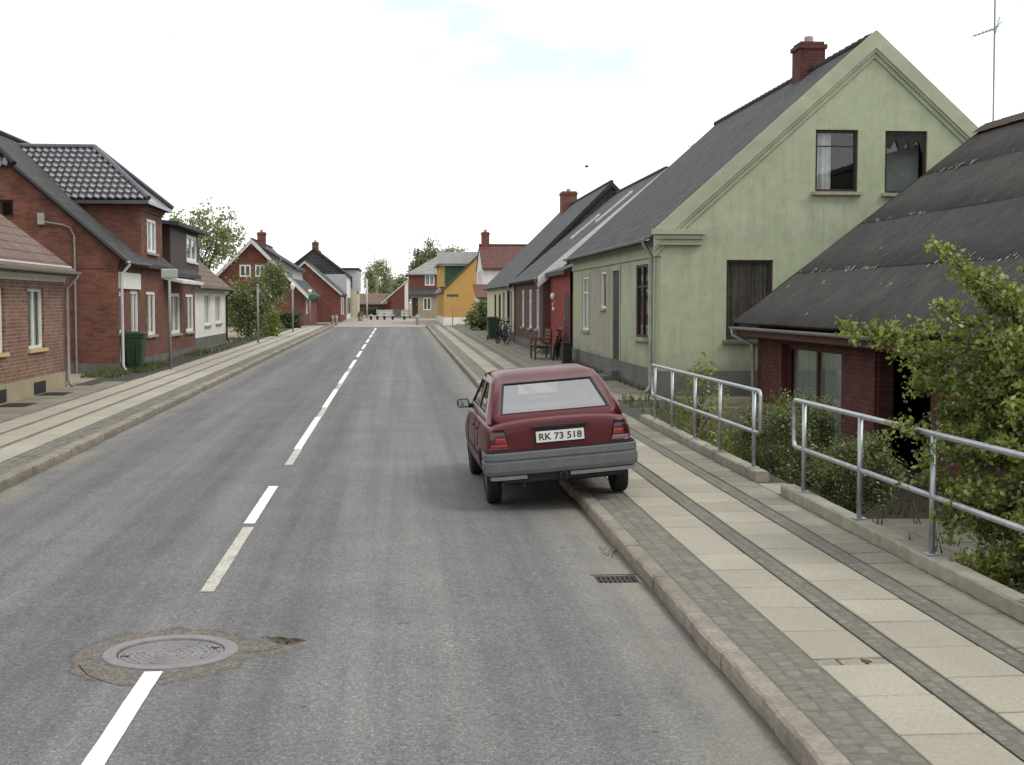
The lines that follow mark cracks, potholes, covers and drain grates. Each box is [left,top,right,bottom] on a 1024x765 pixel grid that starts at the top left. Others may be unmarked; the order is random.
crack [77,663,130,686]
pothole [262,636,306,645]
manhole cover [102,635,239,670]
drain grate [590,575,643,583]
